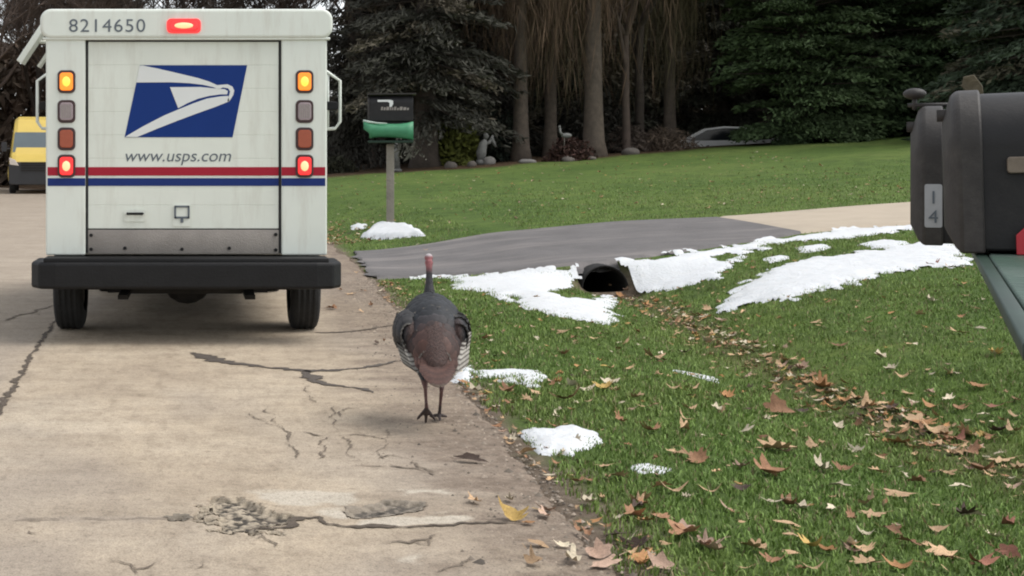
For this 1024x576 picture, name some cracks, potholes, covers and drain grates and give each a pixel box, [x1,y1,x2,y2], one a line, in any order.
crack [6,305,52,320]
crack [111,560,155,573]
pothole [343,499,426,519]
crack [249,384,446,476]
pothole [163,513,194,521]
pothole [192,496,293,536]
